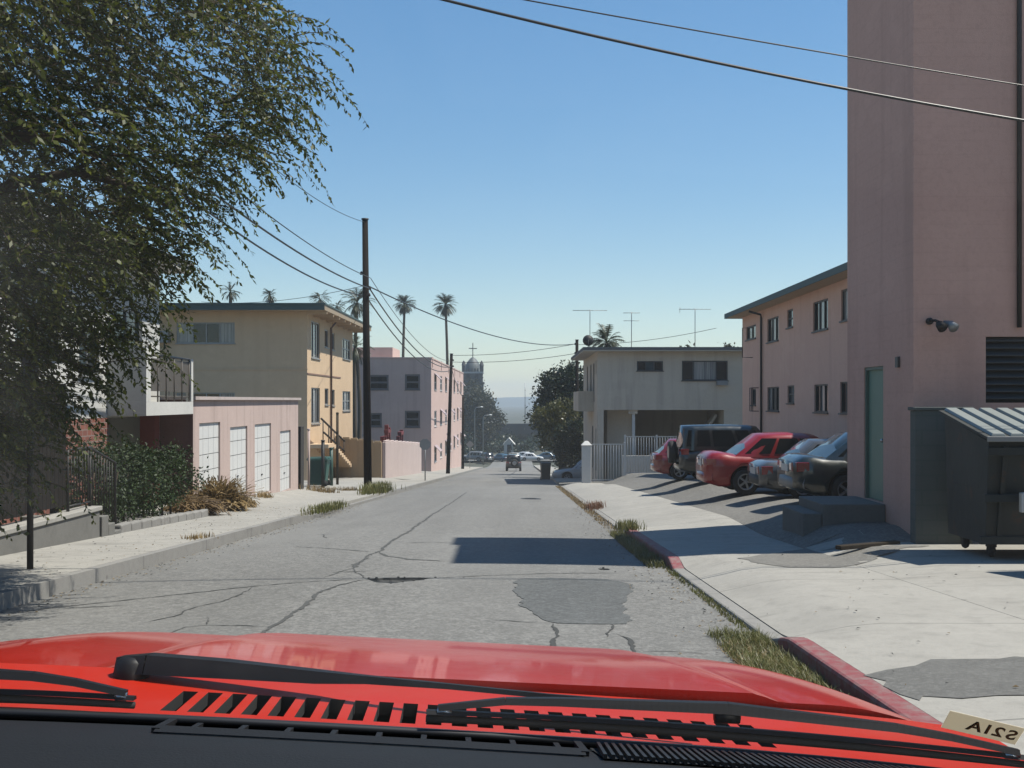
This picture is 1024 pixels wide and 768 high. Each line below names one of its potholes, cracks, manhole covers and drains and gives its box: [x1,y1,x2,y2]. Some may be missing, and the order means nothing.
crack [606,625,636,652]
crack [549,624,560,646]
crack [10,492,547,633]
pothole [367,576,437,584]
